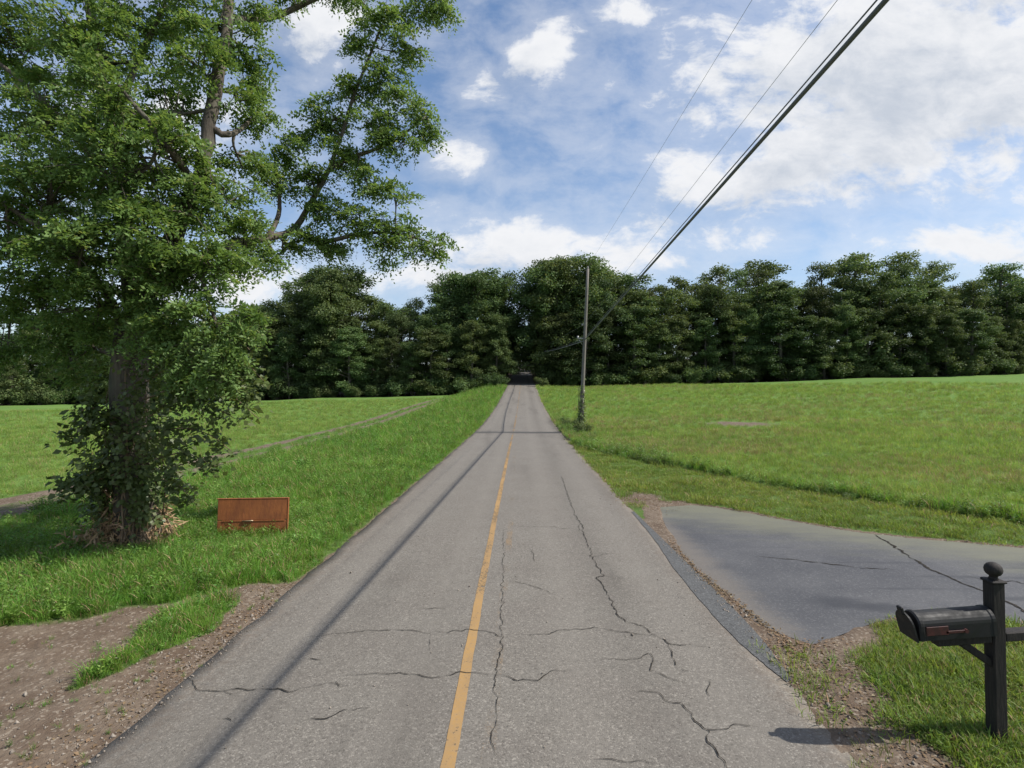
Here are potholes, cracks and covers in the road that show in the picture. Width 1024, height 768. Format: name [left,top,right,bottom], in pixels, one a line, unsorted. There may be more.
crack [759,535,1024,612]
crack [512,480,757,768]
crack [184,531,562,761]
